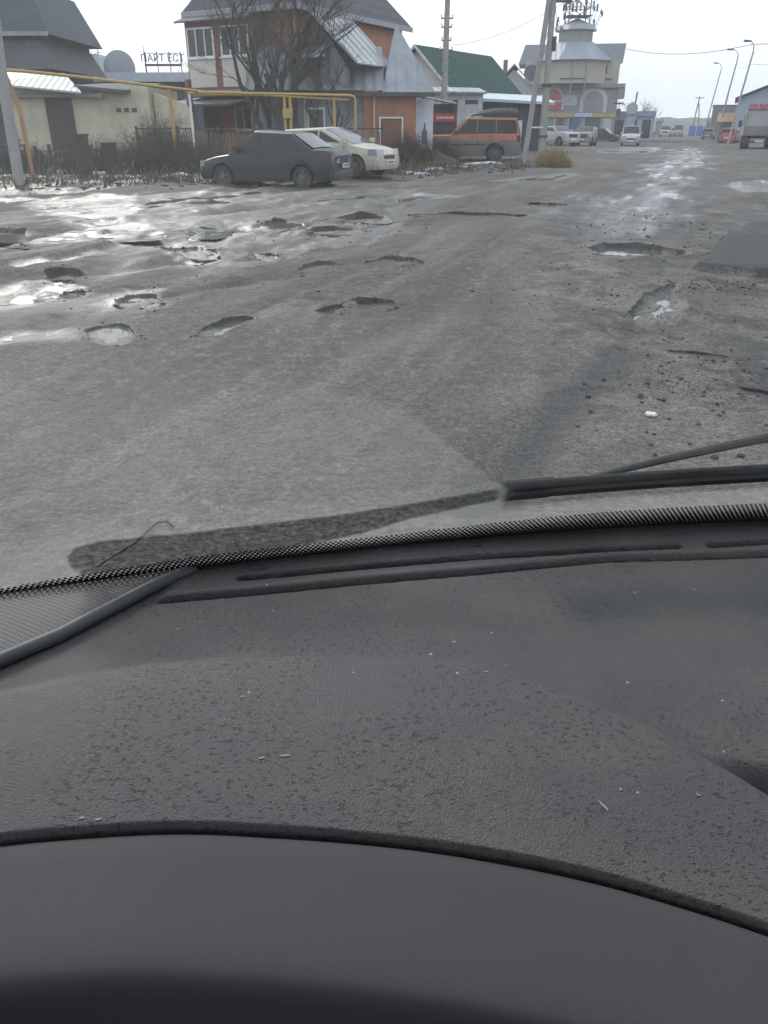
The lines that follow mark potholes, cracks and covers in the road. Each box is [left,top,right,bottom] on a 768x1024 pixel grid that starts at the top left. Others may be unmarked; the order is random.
pothole [152,246,226,265]
pothole [341,296,407,312]
pothole [620,282,696,332]
pothole [256,217,314,231]
pothole [108,292,172,313]
pothole [309,300,360,316]
pothole [191,314,261,338]
pothole [398,211,540,219]
pothole [581,241,701,258]
pothole [290,260,356,279]
pothole [78,321,142,347]
pothole [357,255,432,270]
